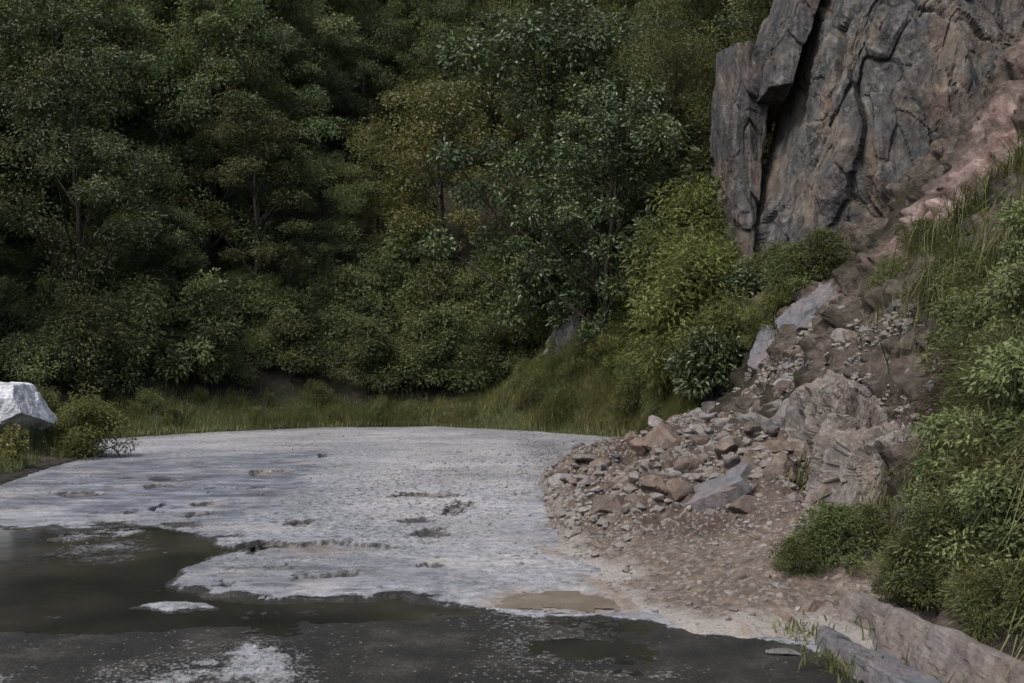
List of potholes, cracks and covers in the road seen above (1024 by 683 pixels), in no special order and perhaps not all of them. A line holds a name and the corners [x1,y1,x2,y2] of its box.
pothole [277,518,322,528]
pothole [42,490,115,499]
pothole [433,499,478,517]
pothole [385,490,480,499]
pothole [0,527,451,622]
pothole [244,468,298,477]
pothole [402,526,459,539]
